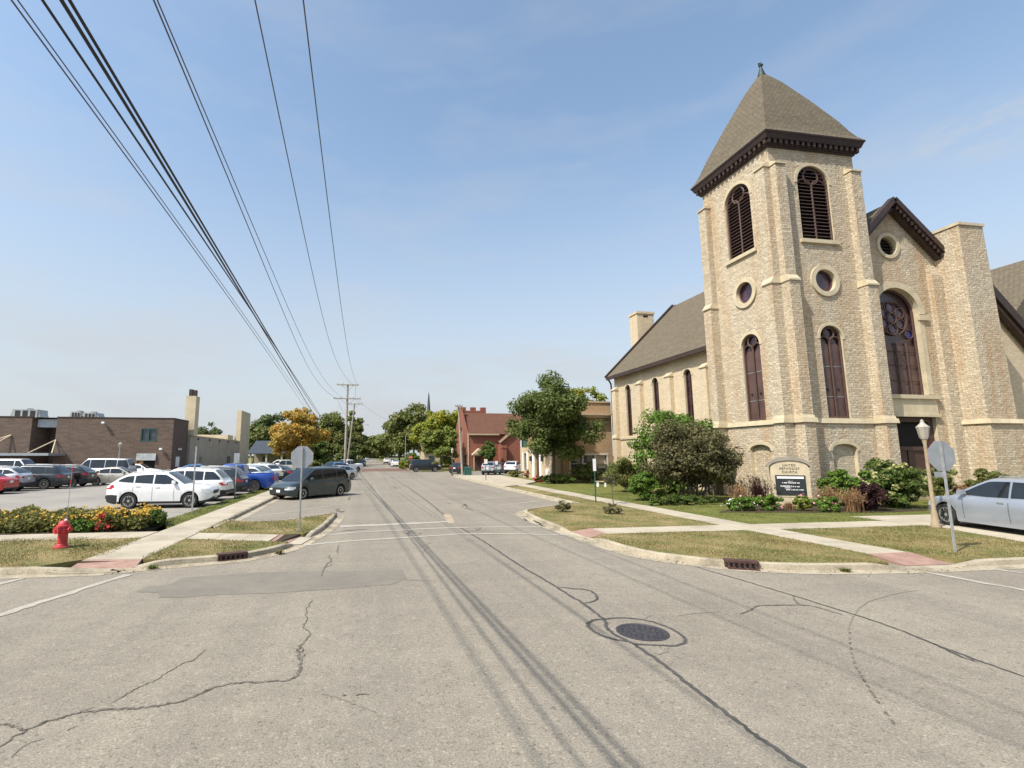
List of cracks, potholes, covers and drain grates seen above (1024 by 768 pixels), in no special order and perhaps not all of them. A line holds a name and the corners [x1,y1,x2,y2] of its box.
drain grate [722,558,761,571]
manhole cover [616,623,670,641]
drain grate [216,550,248,562]
crack [848,590,916,724]
crack [0,598,375,758]
